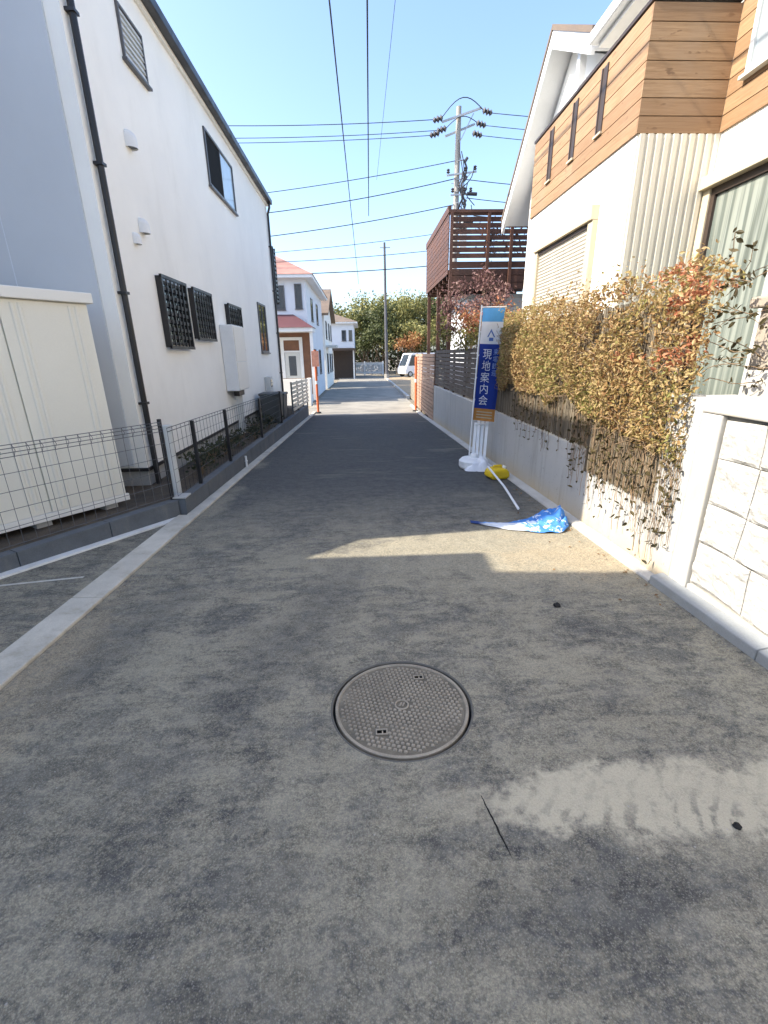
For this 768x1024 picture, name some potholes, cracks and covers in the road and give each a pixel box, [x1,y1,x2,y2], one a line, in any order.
crack [481,796,513,859]
manhole cover [331,661,474,762]
